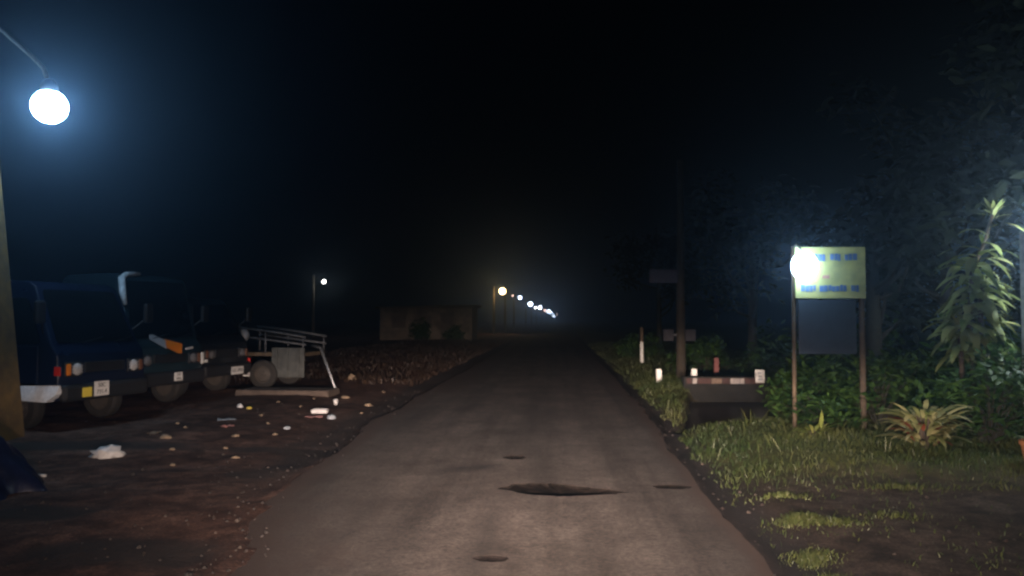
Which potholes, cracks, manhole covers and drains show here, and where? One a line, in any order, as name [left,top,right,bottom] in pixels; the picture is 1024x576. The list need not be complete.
pothole [497,483,629,496]
